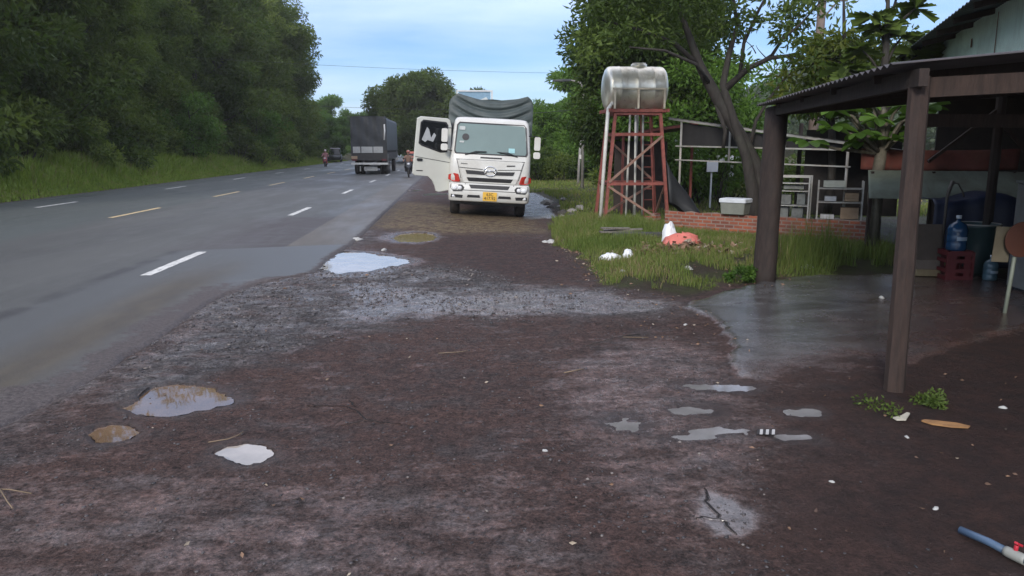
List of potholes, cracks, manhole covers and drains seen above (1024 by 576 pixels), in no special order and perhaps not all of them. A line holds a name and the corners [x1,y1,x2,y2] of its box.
crack [696,488,737,535]
crack [307,400,401,426]
pothole [387,231,442,243]
pothole [318,251,416,275]
pothole [70,419,155,447]
pothole [200,438,288,469]
pothole [105,380,245,421]
